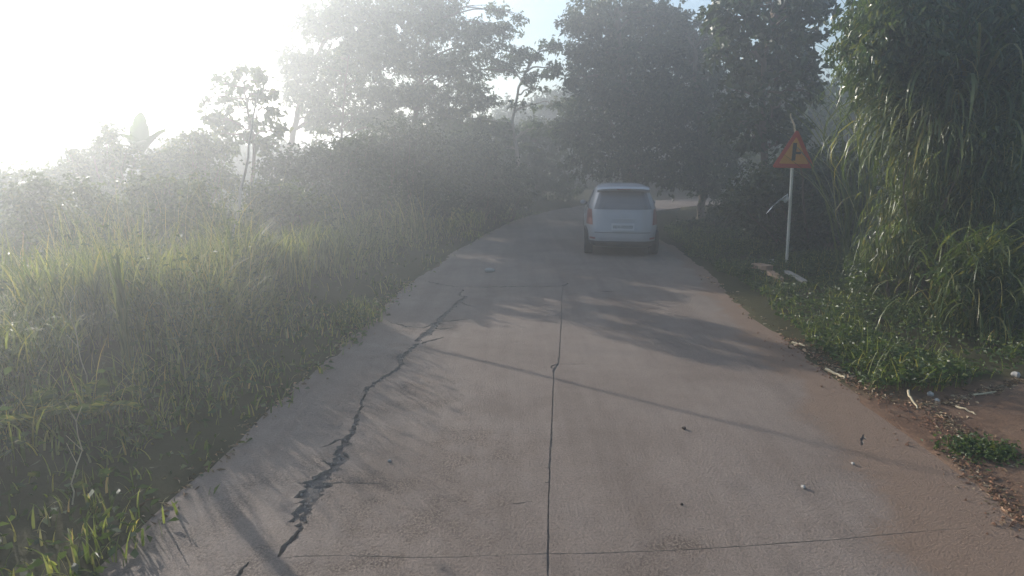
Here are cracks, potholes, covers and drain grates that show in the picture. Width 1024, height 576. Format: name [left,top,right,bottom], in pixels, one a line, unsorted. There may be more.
crack [236,290,470,576]
